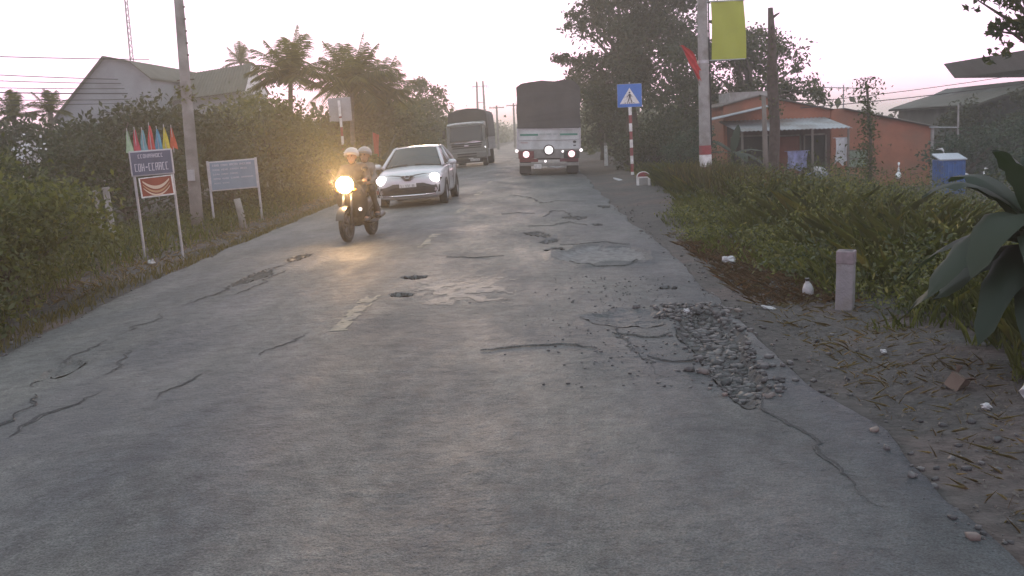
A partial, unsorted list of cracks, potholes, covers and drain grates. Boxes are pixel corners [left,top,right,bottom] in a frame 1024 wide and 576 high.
pothole [675,307,771,409]
crack [155,374,201,400]
crack [506,195,638,266]
crack [756,399,885,508]
crack [481,312,696,376]
crack [0,312,163,437]
crack [184,261,292,305]
